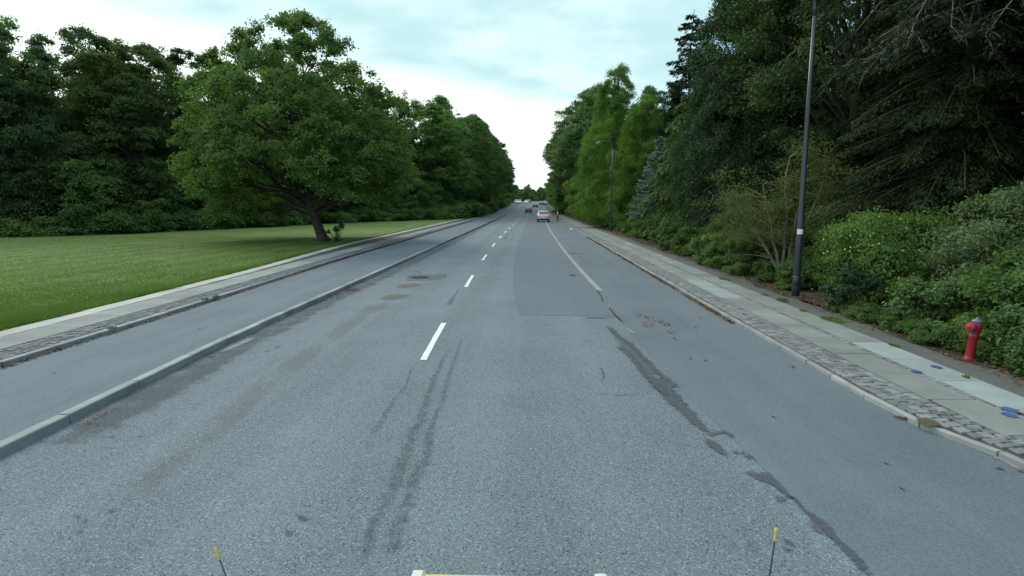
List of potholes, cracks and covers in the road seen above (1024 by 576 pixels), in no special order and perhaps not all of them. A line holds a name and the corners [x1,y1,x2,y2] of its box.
crack [587,290,679,395]
